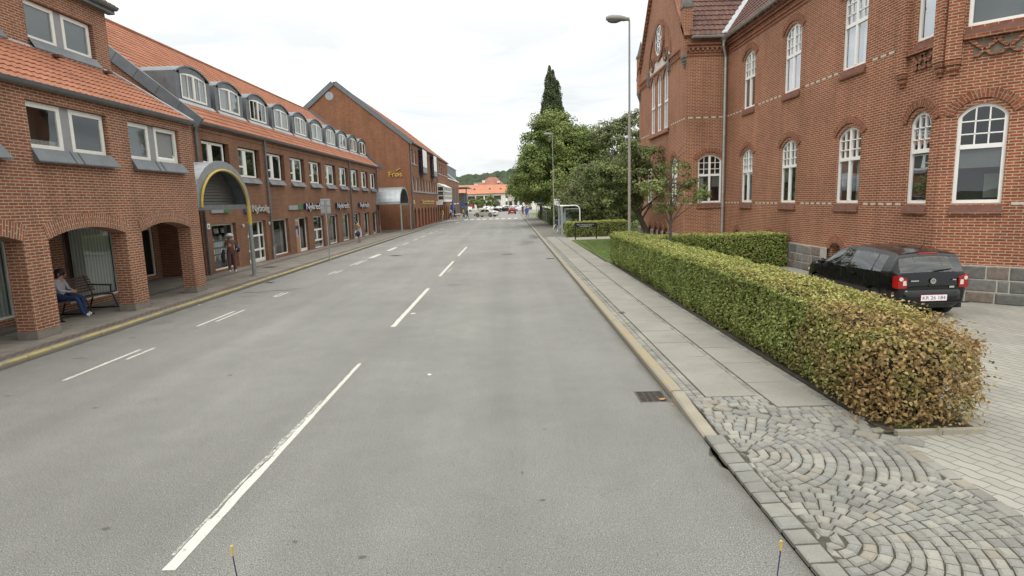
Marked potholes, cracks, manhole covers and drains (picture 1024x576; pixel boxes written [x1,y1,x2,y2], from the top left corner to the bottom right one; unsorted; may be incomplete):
drain grate [634,391,670,403]
